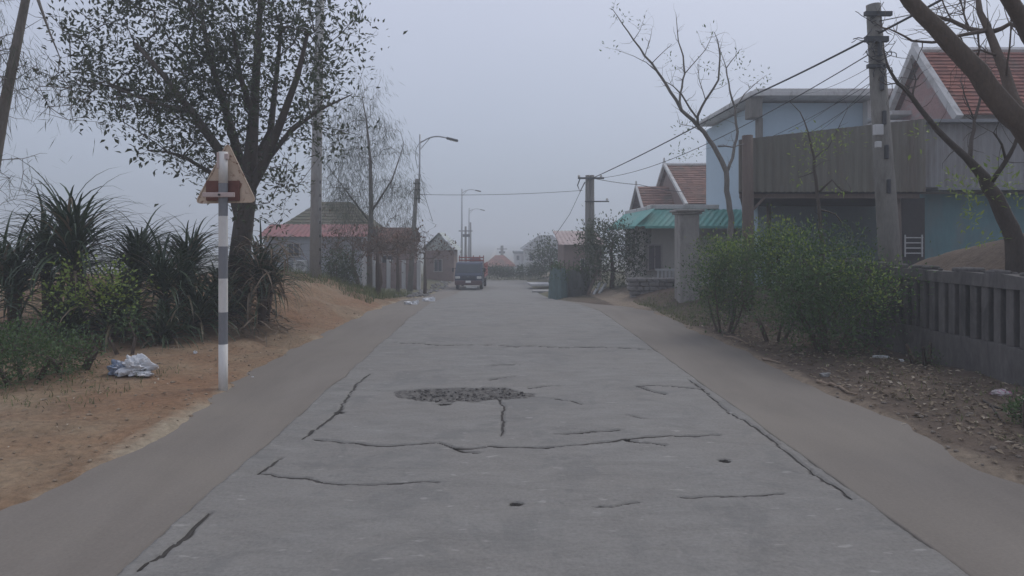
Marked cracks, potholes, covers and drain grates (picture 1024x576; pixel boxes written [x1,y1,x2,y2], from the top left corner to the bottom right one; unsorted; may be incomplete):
crack [314,398,720,454]
crack [263,474,436,486]
crack [638,385,706,395]
pothole [394,387,534,403]
